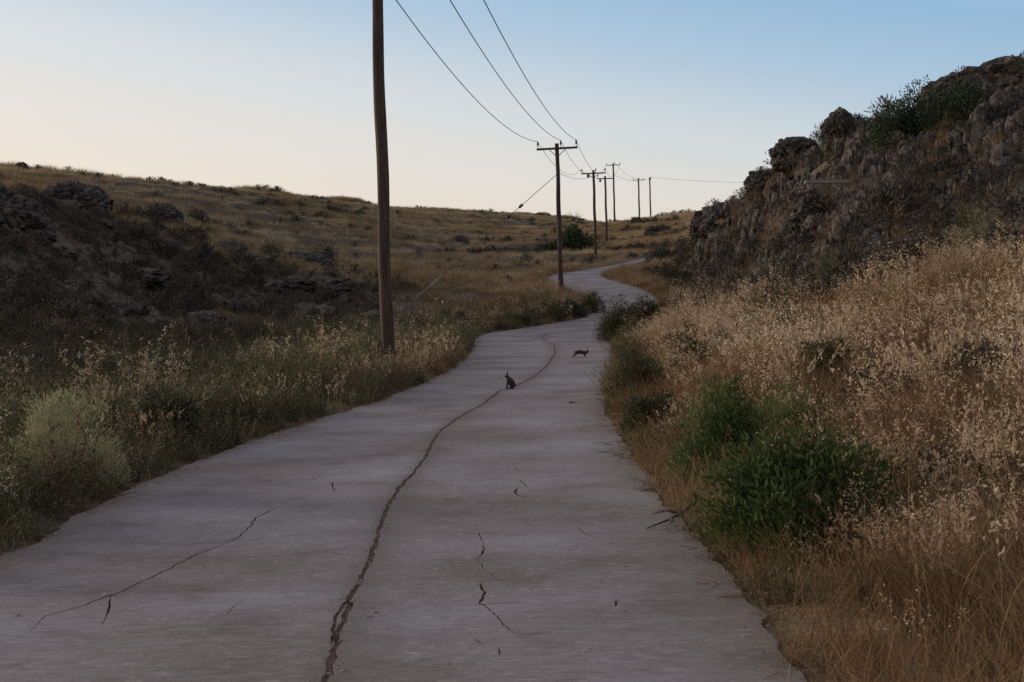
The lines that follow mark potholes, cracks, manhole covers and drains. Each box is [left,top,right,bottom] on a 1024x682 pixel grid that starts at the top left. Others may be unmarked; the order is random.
crack [301,334,556,682]
crack [32,494,310,629]
